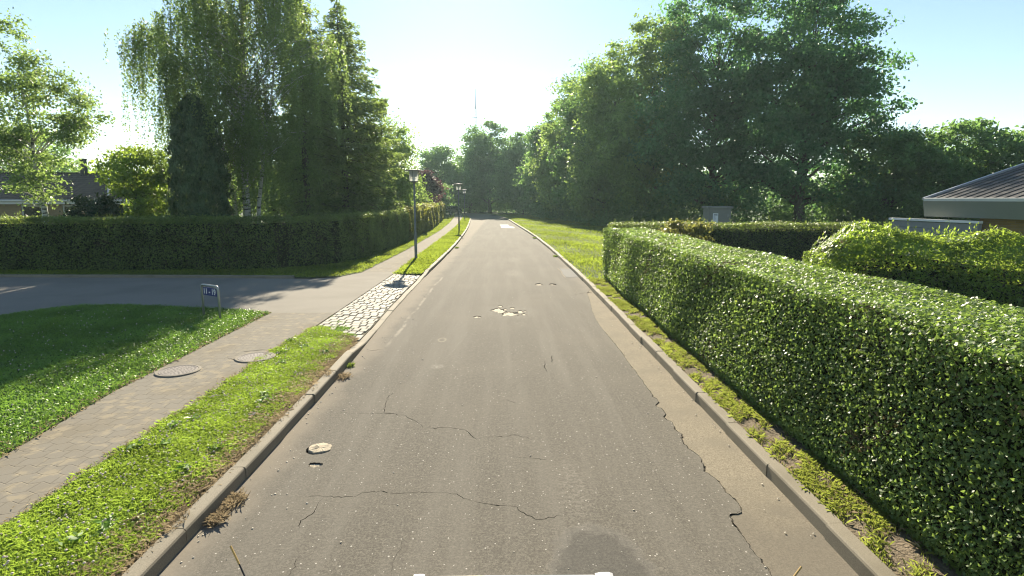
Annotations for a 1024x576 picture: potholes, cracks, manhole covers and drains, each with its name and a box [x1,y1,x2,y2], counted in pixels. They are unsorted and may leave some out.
pothole [492,306,526,316]
crack [299,491,573,528]
manhole cover [154,364,201,378]
crack [607,334,772,576]
manhole cover [234,352,276,363]
